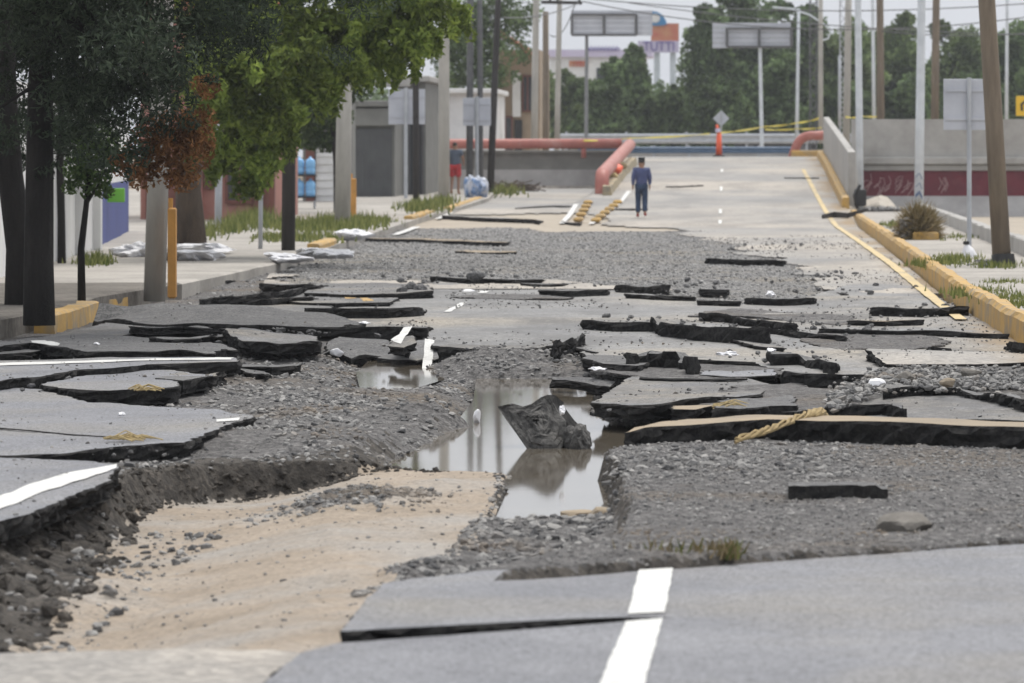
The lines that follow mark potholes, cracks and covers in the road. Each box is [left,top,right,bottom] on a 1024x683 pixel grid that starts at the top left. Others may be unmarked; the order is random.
crack [0,428,106,437]
crack [340,628,535,643]
pothole [362,370,668,578]
pothole [337,356,459,388]
